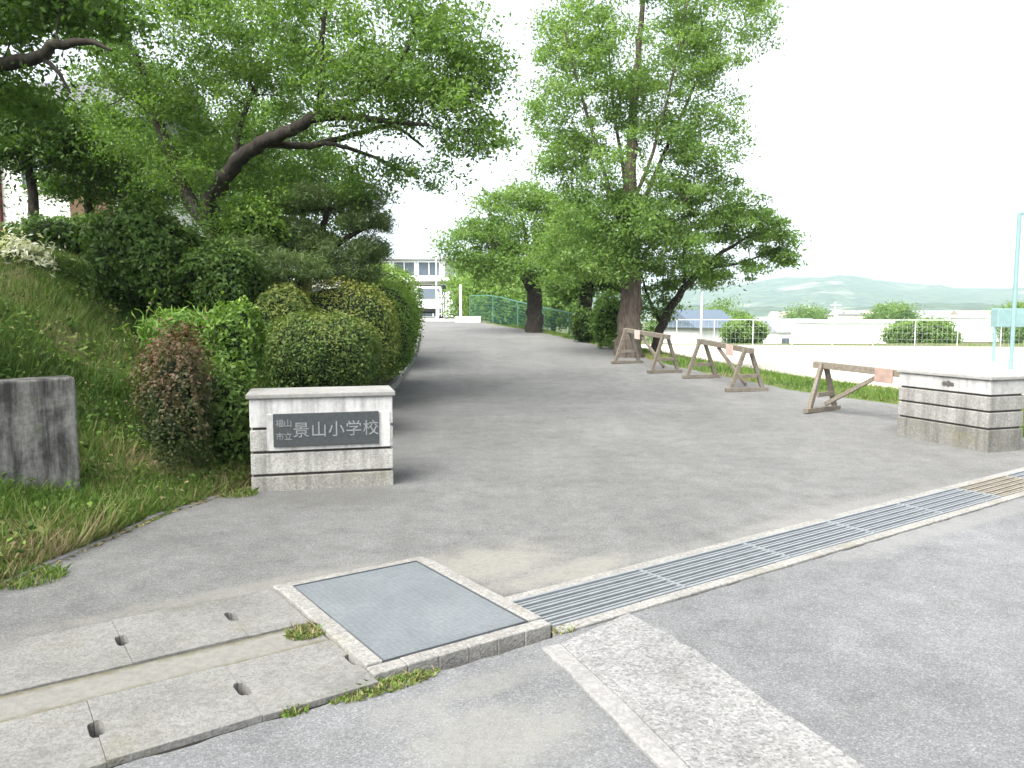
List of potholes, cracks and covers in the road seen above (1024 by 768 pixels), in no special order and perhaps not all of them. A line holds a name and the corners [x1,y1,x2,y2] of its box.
drain grate [504,467,1024,638]
manhole cover [273,556,551,687]
